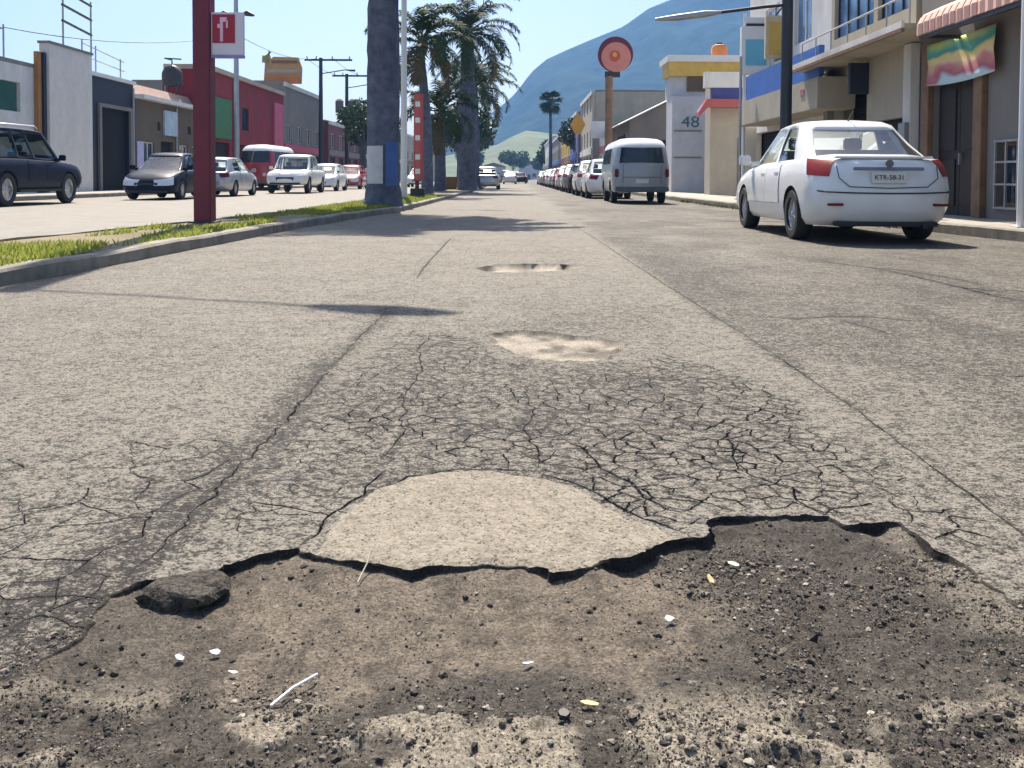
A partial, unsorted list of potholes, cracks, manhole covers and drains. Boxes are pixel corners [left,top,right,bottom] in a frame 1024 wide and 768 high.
pothole [474,263,586,272]
crack [417,239,450,278]
crack [0,307,390,637]
pothole [0,514,1024,768]
crack [223,331,994,545]
